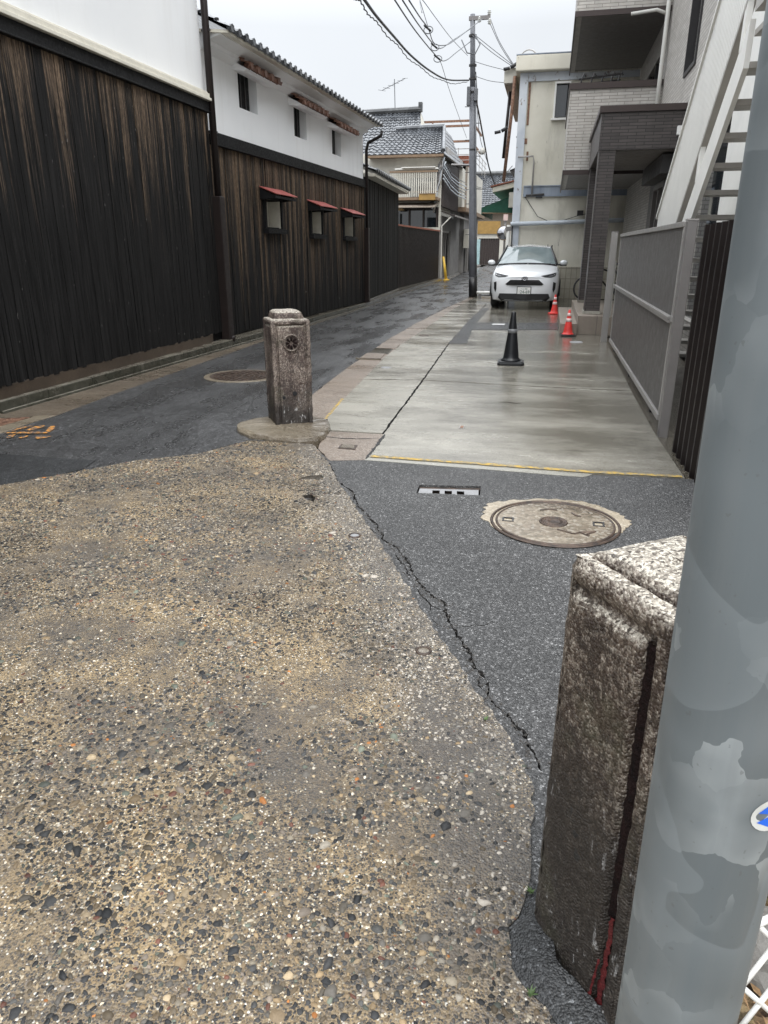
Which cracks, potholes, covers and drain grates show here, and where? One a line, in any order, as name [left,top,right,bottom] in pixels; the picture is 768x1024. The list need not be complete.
crack [329,463,541,770]
manhole cover [204,370,266,383]
manhole cover [480,498,632,548]
